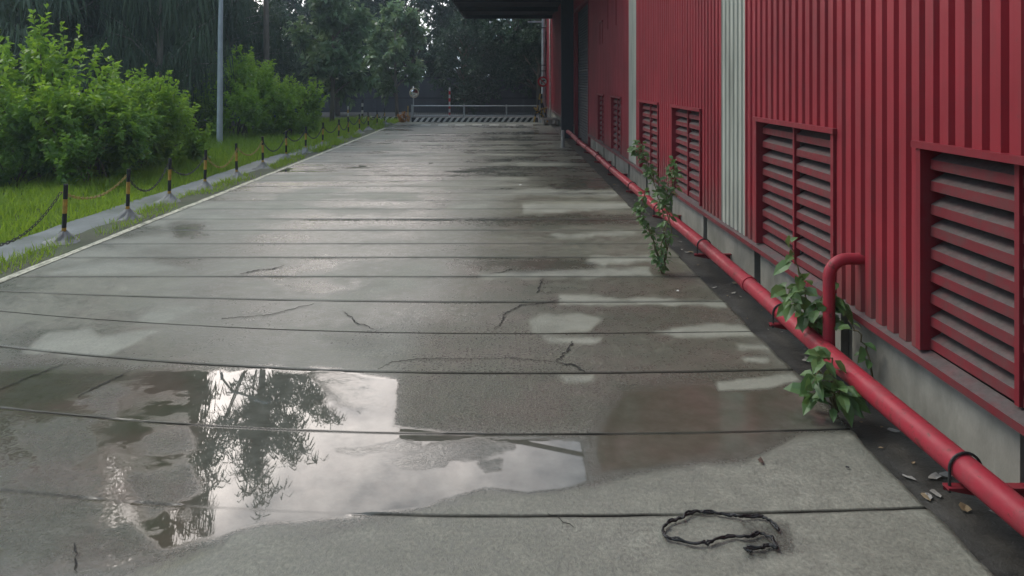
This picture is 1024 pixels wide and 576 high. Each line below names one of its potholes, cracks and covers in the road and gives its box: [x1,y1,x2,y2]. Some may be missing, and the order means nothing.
crack [378,341,585,372]
crack [494,279,559,329]
